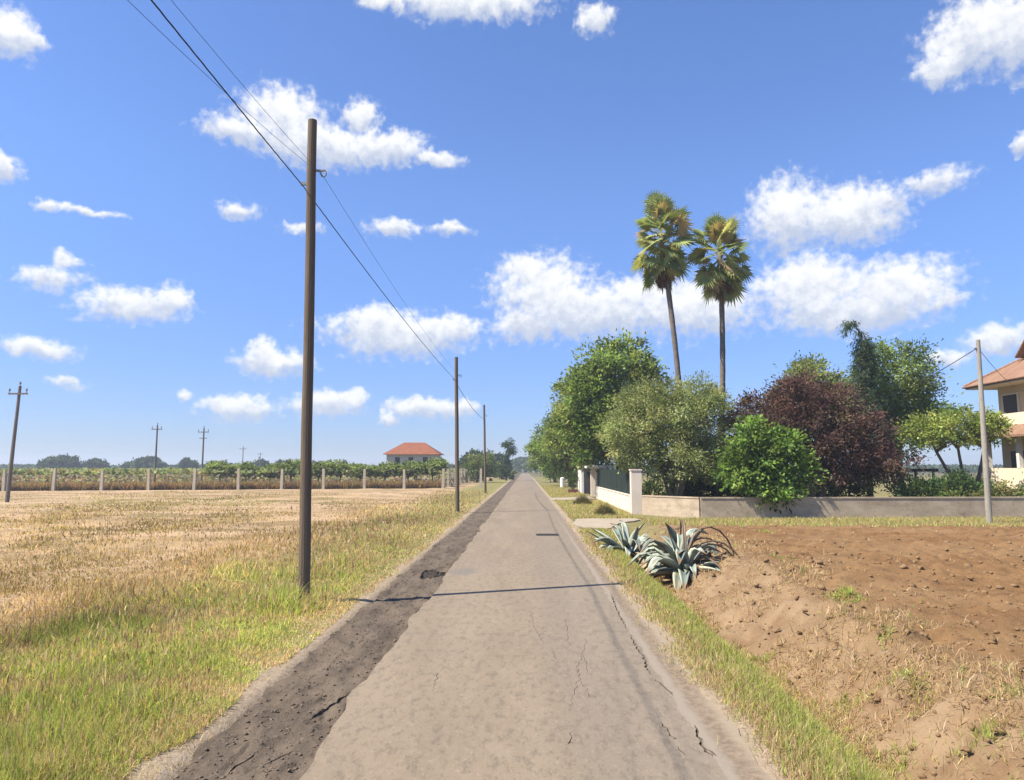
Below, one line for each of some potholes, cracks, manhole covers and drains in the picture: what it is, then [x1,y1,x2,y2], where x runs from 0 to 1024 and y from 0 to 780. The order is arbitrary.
crack [610,593,673,695]
crack [532,616,589,706]
crack [659,721,717,757]
pothole [420,569,446,579]
